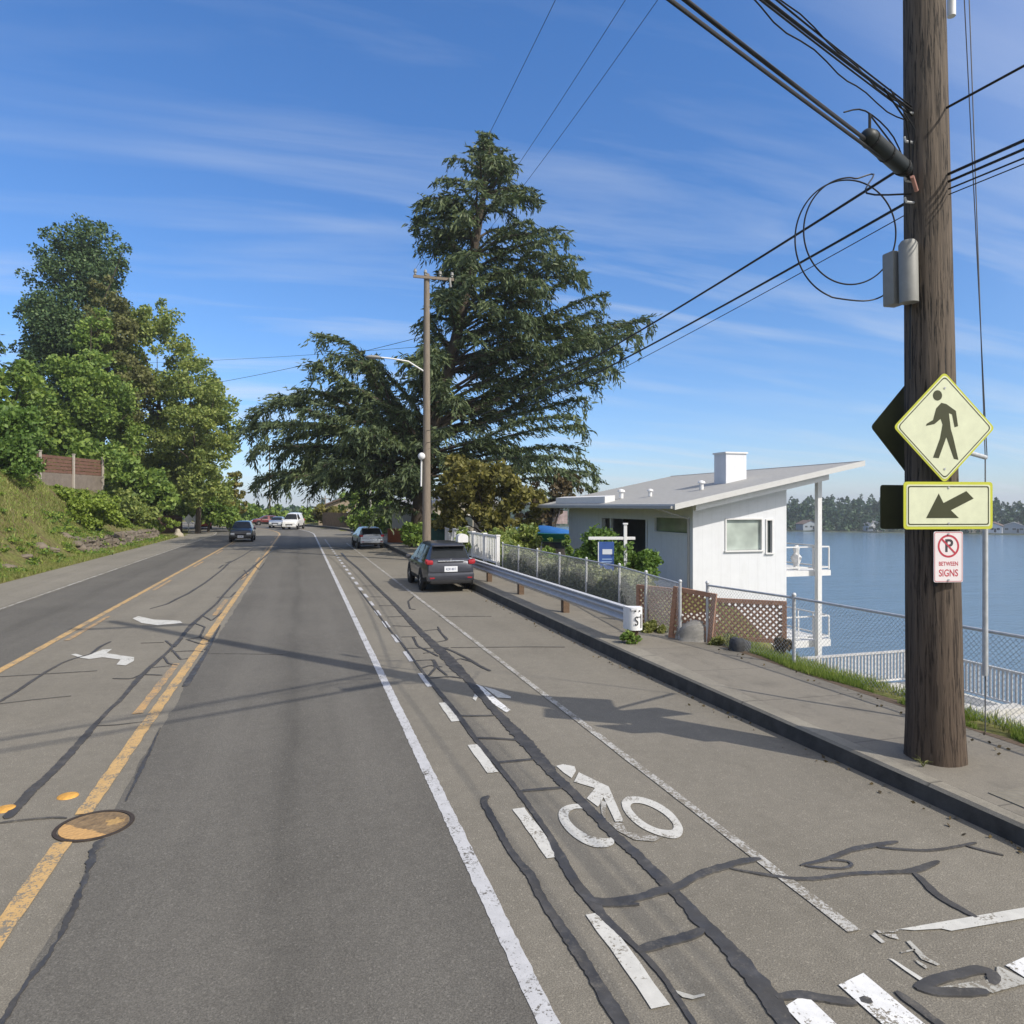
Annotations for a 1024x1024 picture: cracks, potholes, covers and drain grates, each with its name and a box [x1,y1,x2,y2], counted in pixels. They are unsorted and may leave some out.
manhole cover [52,809,135,843]
